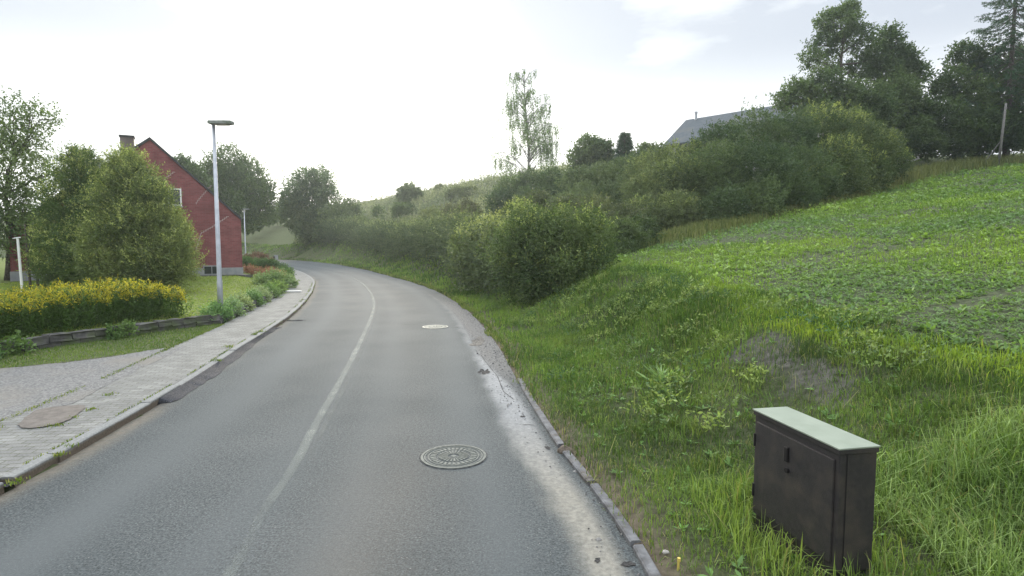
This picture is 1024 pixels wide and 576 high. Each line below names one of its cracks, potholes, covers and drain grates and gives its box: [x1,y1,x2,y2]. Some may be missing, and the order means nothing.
manhole cover [419,444,488,470]
